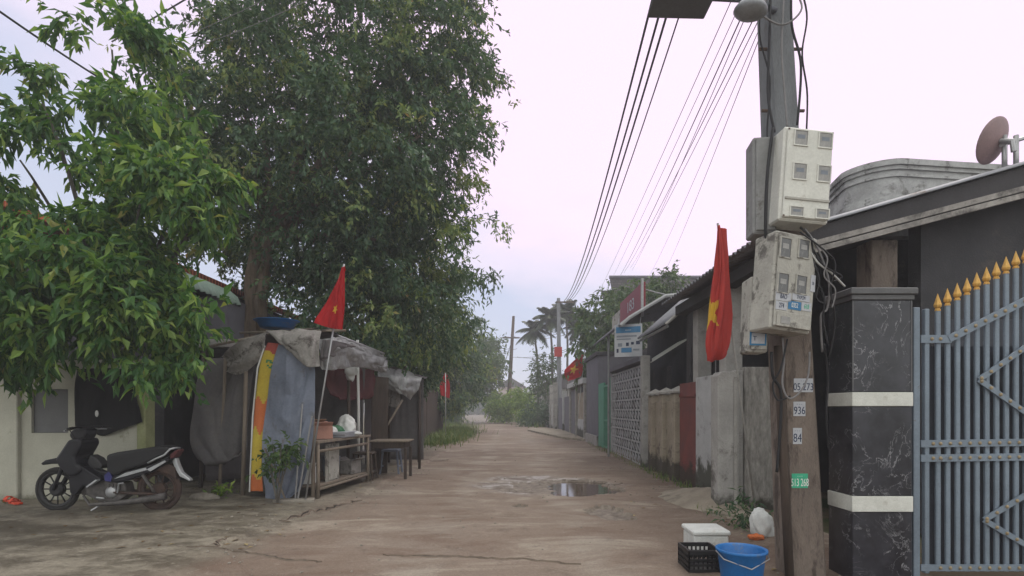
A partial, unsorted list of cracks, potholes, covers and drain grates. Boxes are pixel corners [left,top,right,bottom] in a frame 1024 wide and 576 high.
crack [383,554,581,565]
crack [186,538,322,563]
pothole [493,479,626,497]
